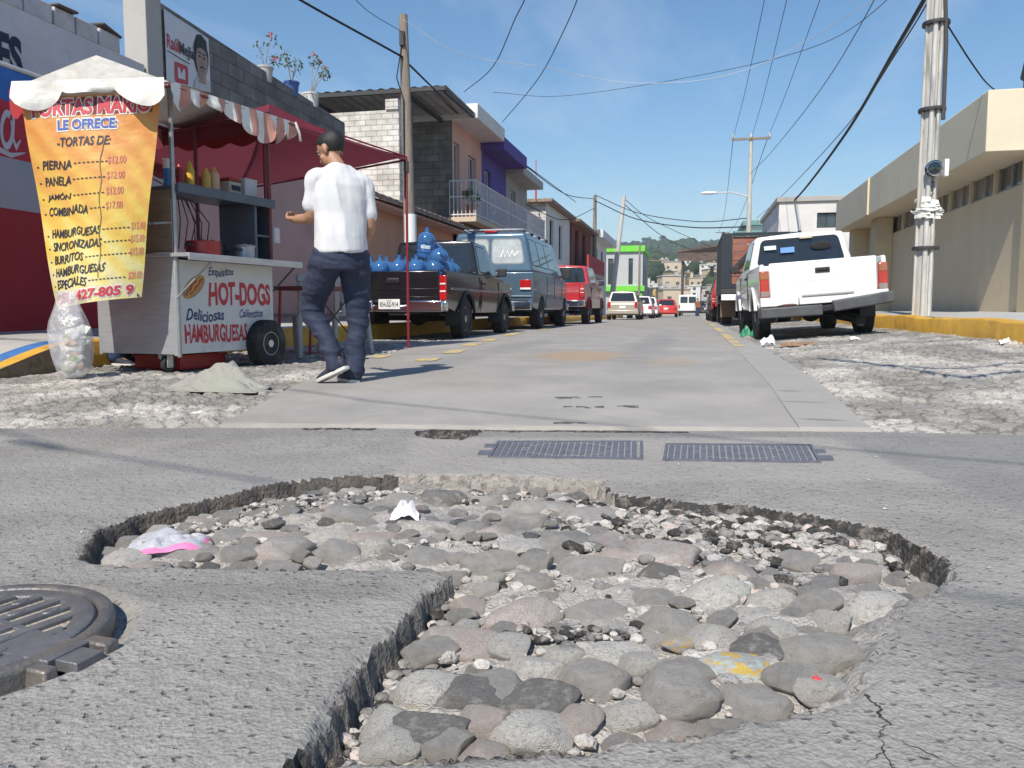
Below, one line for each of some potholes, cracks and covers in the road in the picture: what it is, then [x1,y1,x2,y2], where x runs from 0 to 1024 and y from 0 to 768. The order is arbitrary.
crack [863,694,958,768]
pothole [414,429,482,440]
pothole [78,473,959,768]
manhole cover [0,584,120,696]
